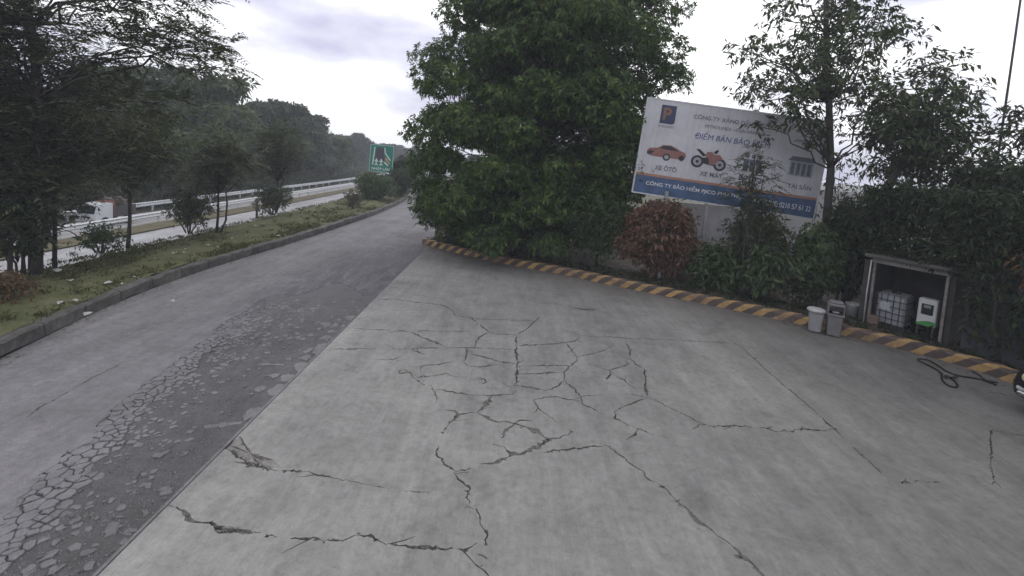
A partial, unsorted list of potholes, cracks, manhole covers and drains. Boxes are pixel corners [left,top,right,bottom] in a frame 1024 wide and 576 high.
crack [0,283,881,576]
crack [989,429,1024,489]
